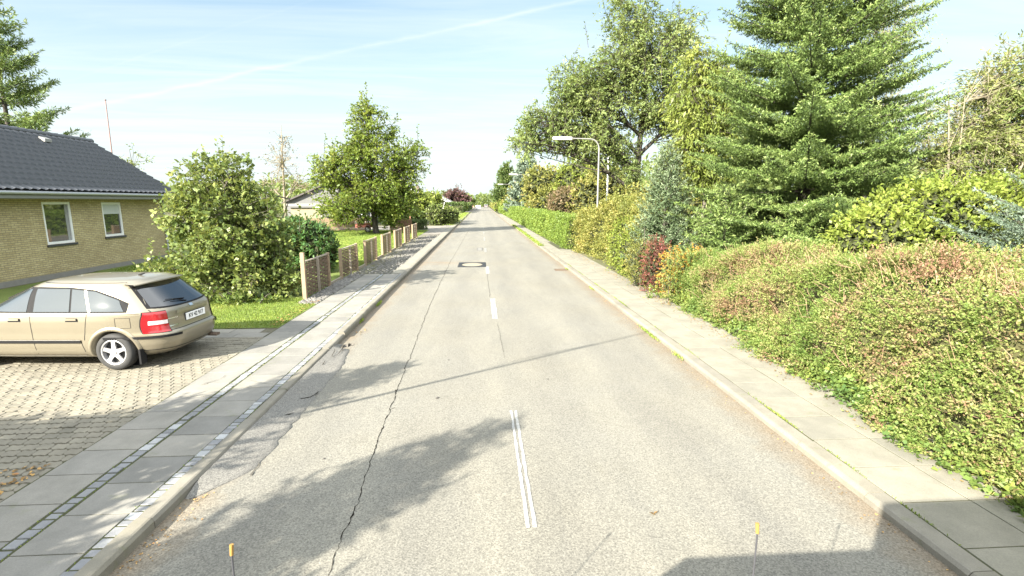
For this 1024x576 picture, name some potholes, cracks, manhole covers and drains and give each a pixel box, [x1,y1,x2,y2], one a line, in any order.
crack [328,230,469,576]
